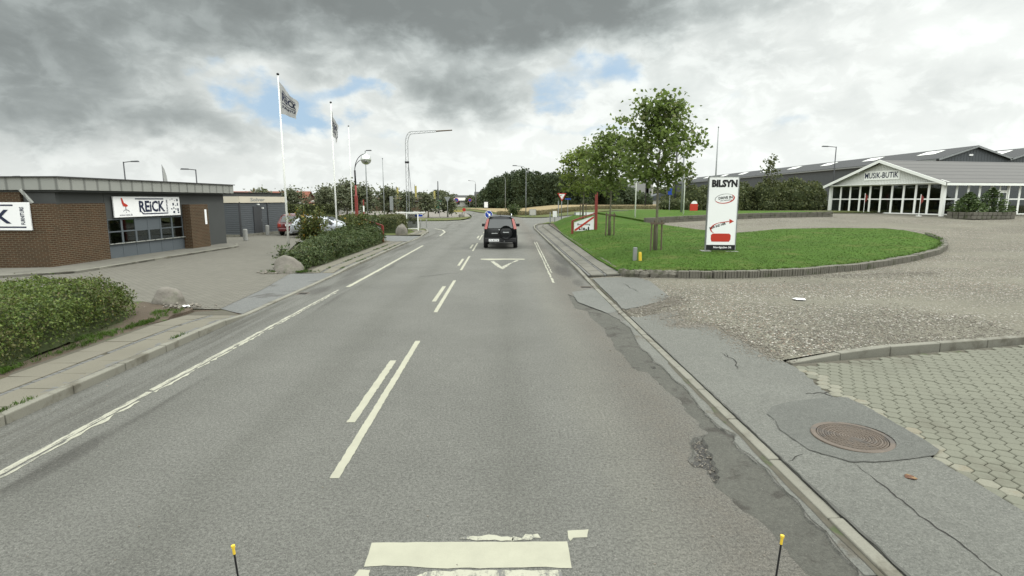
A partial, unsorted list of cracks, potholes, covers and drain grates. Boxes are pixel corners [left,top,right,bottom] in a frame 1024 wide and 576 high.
crack [857,465,1002,576]
manhole cover [810,422,896,453]
pothole [689,437,720,484]
